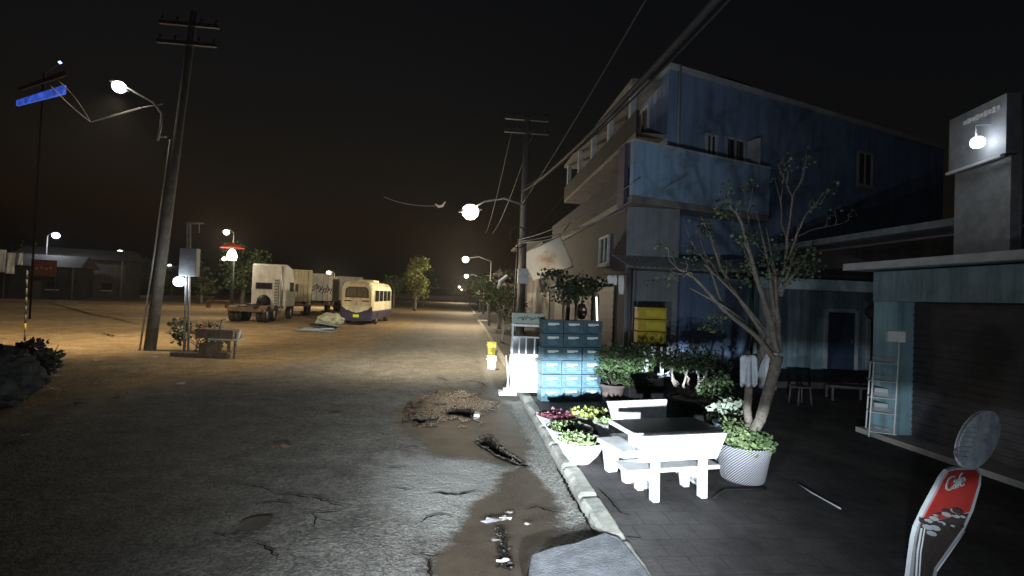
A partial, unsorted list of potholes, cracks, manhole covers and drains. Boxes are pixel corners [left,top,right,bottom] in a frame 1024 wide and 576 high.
pothole [406,416,439,424]
crack [243,484,353,525]
pothole [444,407,475,418]
crack [382,487,479,495]
pothole [475,433,526,465]
crack [214,531,280,560]
